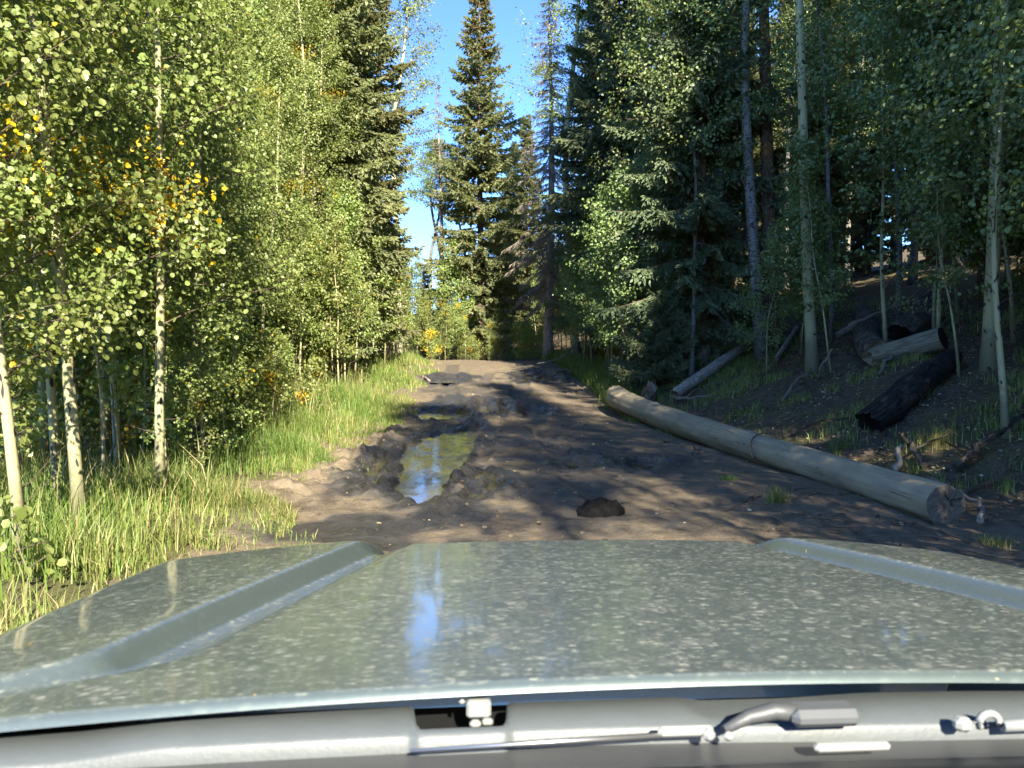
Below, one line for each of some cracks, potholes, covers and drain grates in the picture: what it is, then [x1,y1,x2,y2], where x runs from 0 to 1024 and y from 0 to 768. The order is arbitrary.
pothole [385,418,485,506]
pothole [408,405,475,420]
